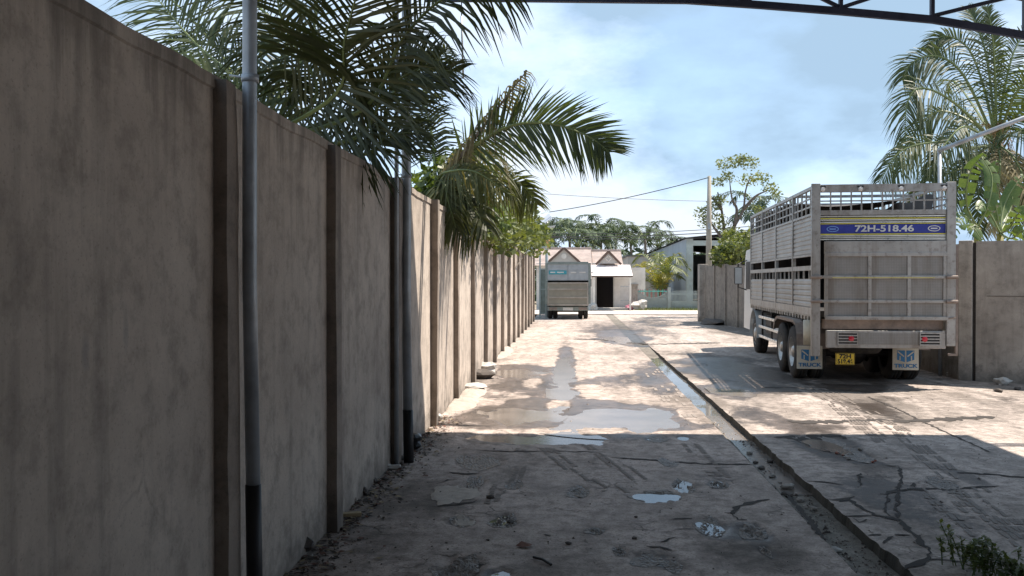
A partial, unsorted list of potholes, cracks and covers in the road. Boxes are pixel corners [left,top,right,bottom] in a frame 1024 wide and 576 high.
crack [724,464,1022,569]
pothole [567,485,589,498]
pothole [487,513,517,528]
pothole [695,516,725,537]
